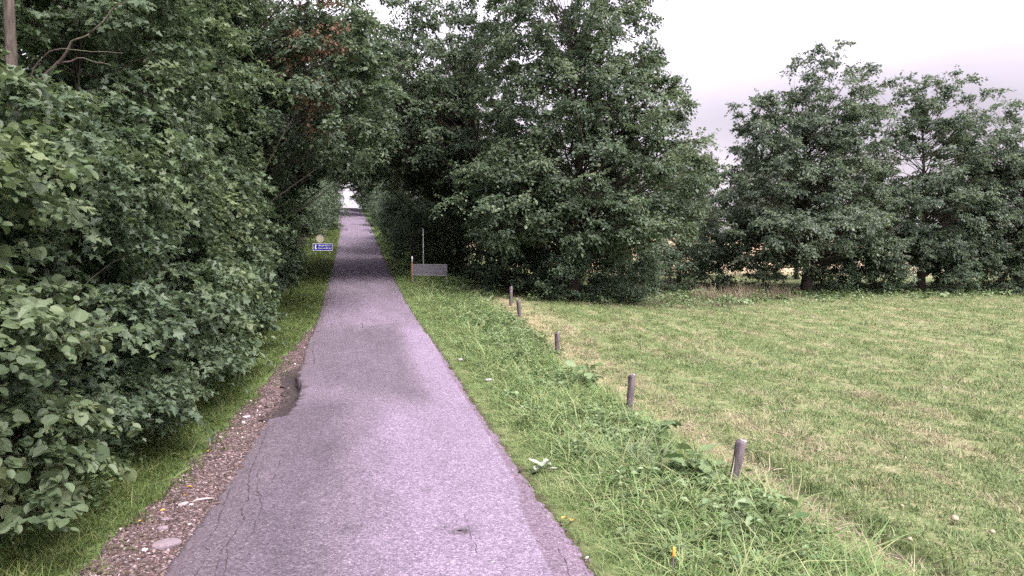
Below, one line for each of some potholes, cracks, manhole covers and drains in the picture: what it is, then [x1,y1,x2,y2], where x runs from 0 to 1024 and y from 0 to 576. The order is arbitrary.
crack [194,425,285,576]
pothole [259,367,300,422]
